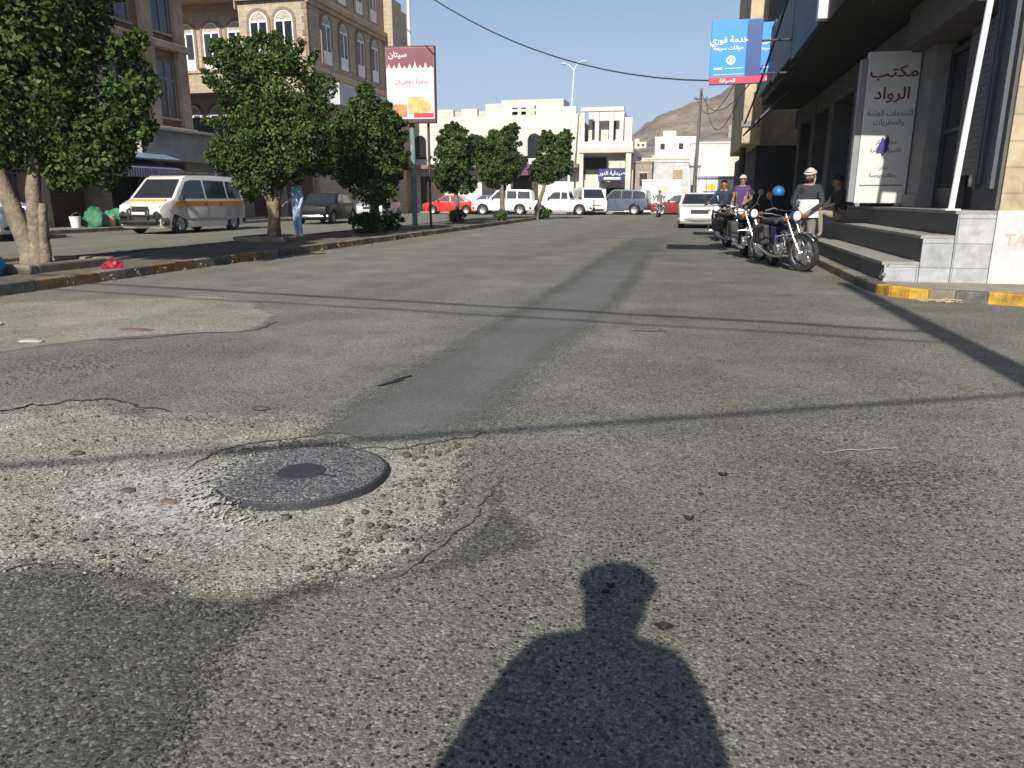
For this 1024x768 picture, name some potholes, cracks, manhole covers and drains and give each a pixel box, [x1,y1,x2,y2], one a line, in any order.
manhole cover [211,446,388,512]
crack [188,431,486,468]
crack [365,489,495,582]
